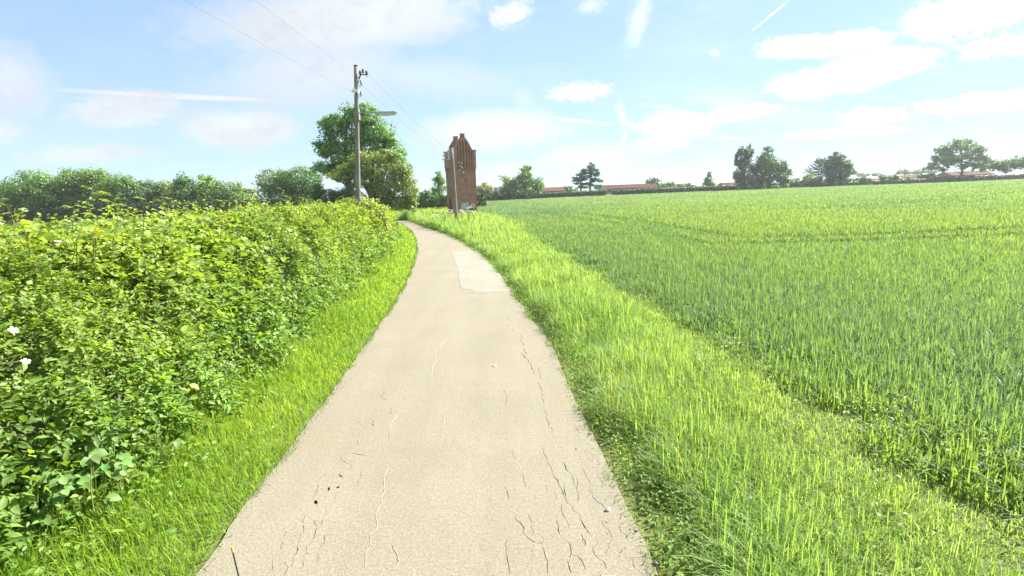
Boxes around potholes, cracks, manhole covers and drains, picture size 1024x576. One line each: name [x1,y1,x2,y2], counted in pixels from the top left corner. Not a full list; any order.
crack [272,396,396,575]
crack [486,447,649,574]
